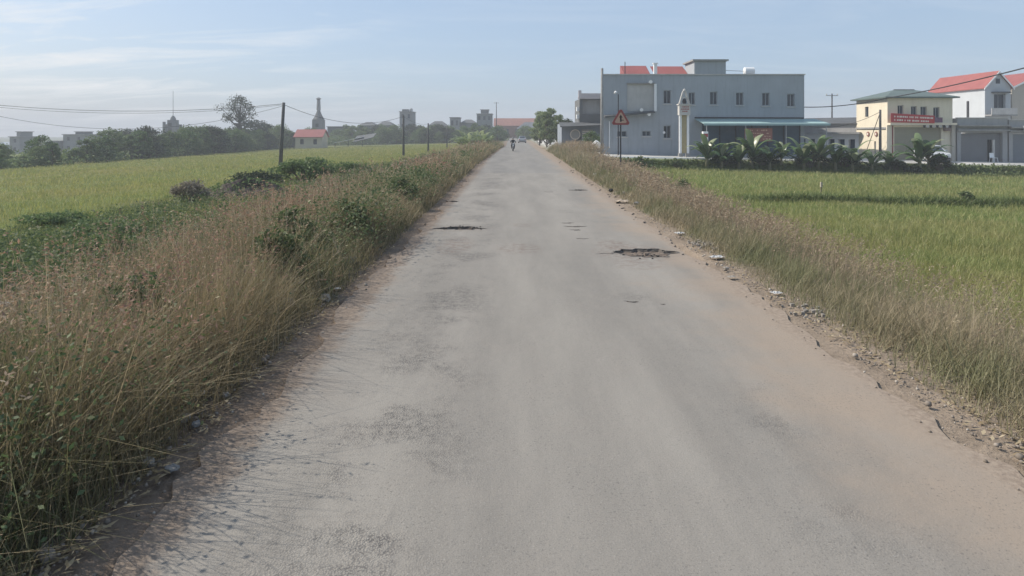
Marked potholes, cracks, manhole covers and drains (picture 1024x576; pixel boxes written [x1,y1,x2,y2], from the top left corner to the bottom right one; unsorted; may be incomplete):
pothole [611,248,684,259]
